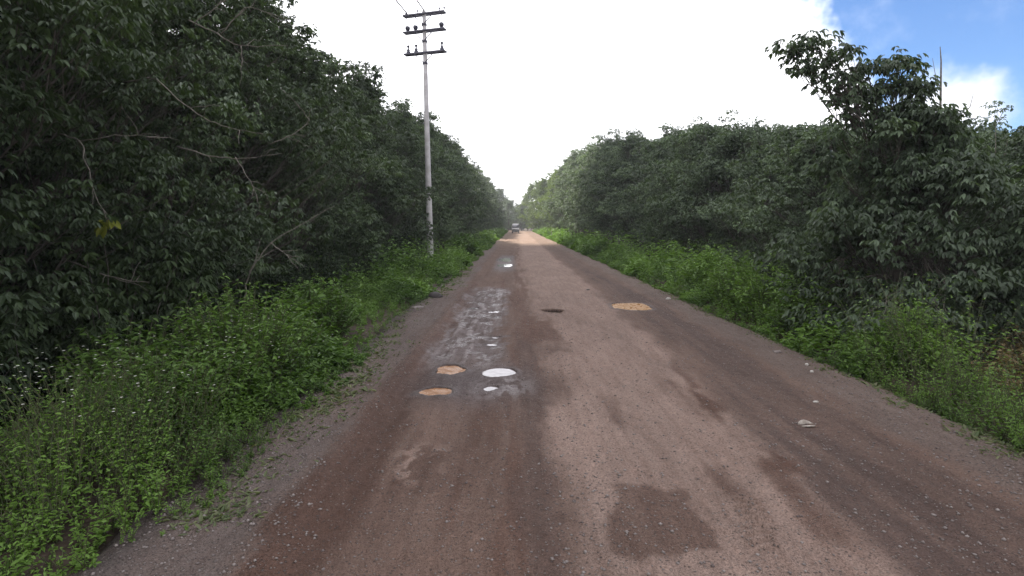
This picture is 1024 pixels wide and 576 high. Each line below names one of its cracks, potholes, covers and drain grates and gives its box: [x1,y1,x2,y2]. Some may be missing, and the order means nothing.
pothole [475,366,523,379]
